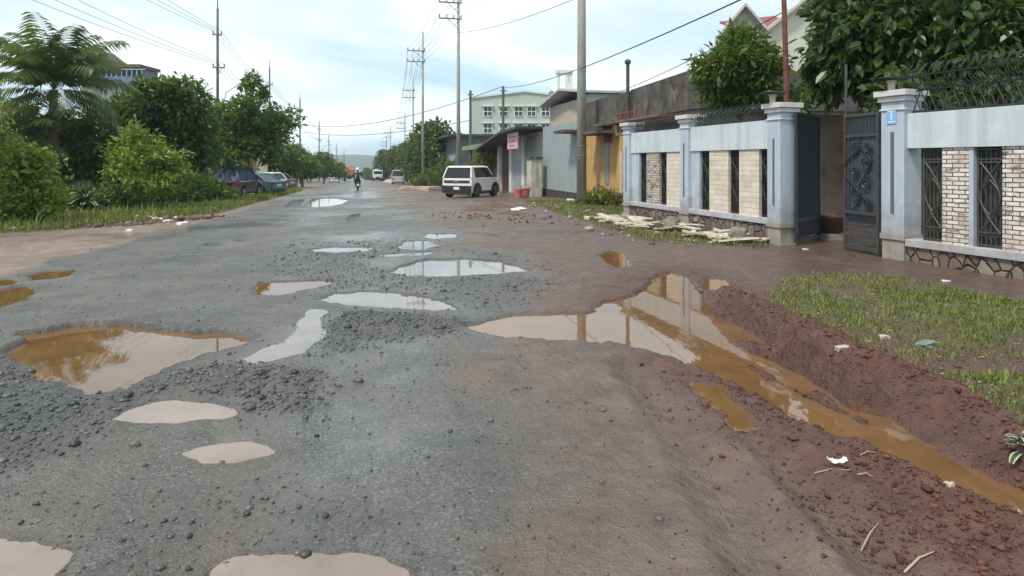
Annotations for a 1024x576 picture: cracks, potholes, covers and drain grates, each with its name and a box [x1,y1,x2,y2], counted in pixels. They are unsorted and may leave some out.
pothole [180,531,442,576]
pothole [304,245,382,253]
pothole [0,317,266,395]
pothole [0,277,26,287]
pothole [242,277,344,296]
pothole [0,283,51,309]
pothole [16,267,85,281]
pothole [86,392,263,430]
pothole [377,256,539,277]
pothole [0,515,107,576]
pothole [305,198,352,207]
pothole [390,239,444,251]
